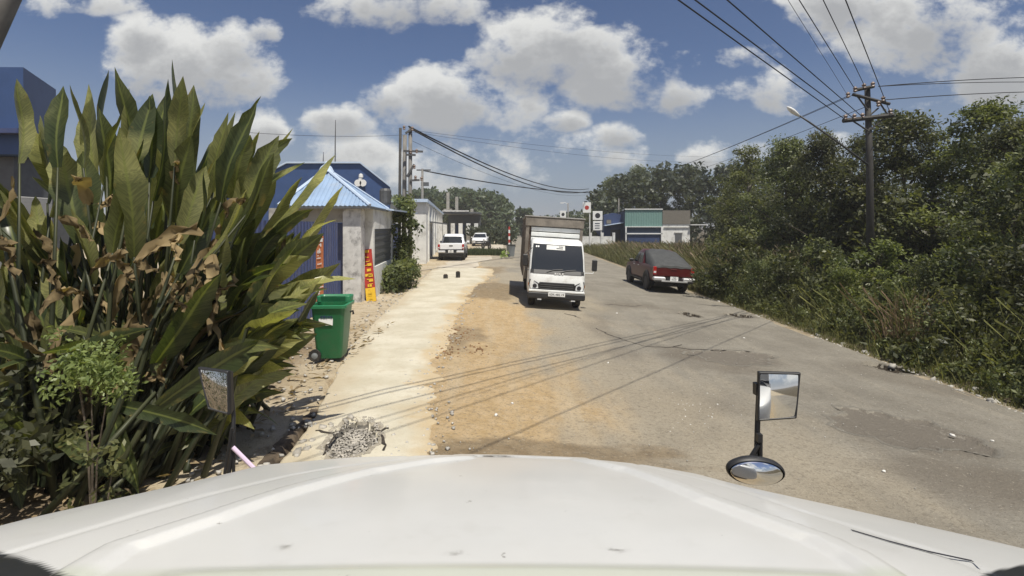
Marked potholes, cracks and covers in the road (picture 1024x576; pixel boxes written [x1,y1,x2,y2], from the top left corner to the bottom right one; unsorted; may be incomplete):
pothole [860,361,925,375]
crack [596,328,750,352]
